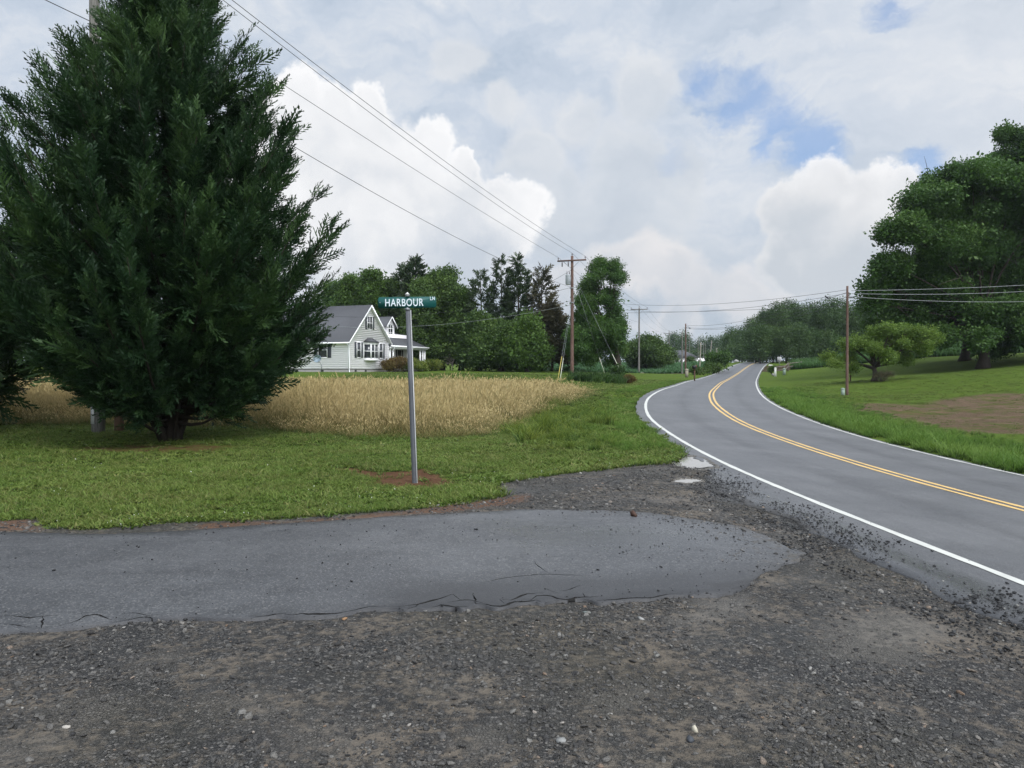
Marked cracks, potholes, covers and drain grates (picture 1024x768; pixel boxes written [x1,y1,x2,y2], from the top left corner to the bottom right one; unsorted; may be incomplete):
crack [10,613,153,628]
crack [408,563,600,612]
pothole [669,455,720,470]
